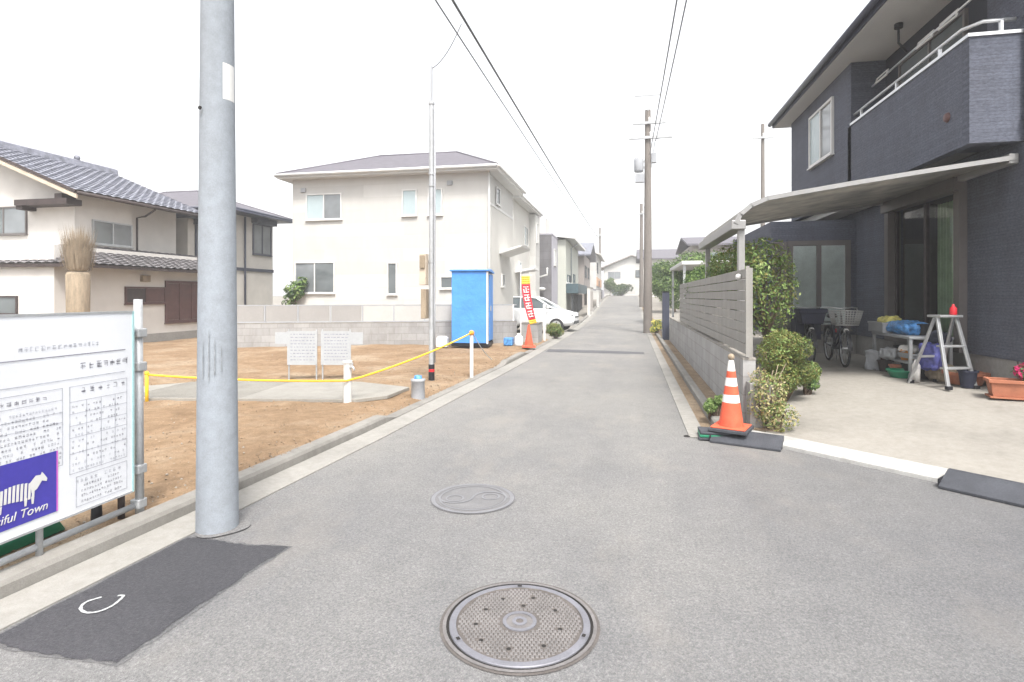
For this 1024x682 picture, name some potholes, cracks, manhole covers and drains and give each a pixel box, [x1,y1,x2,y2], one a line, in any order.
manhole cover [430,484,515,514]
manhole cover [439,581,600,676]
